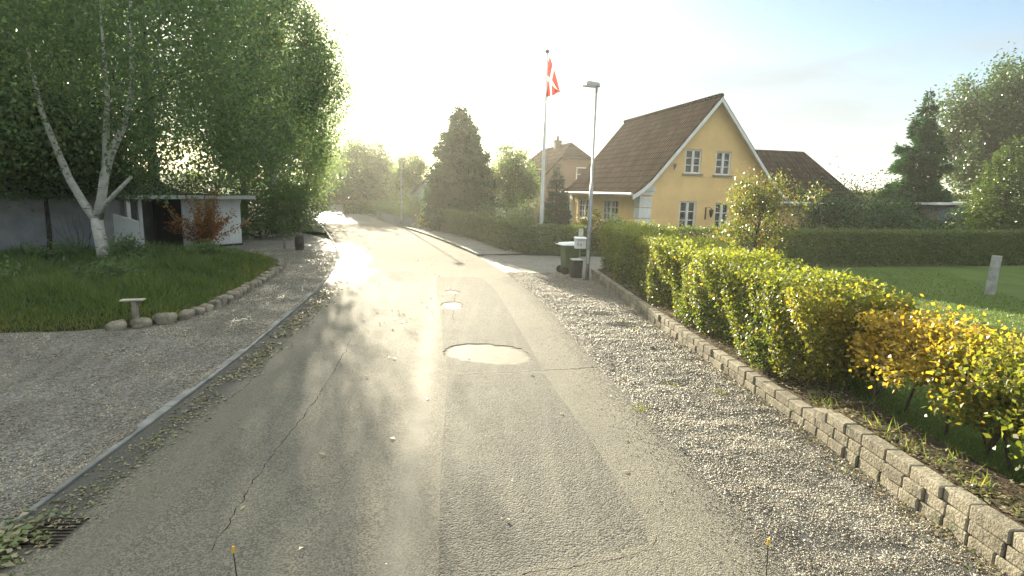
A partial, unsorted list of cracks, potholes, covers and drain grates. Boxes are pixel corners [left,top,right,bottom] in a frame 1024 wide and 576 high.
crack [209,335,354,553]
pothole [440,302,464,310]
drain grate [12,518,90,549]
pothole [443,343,534,365]
